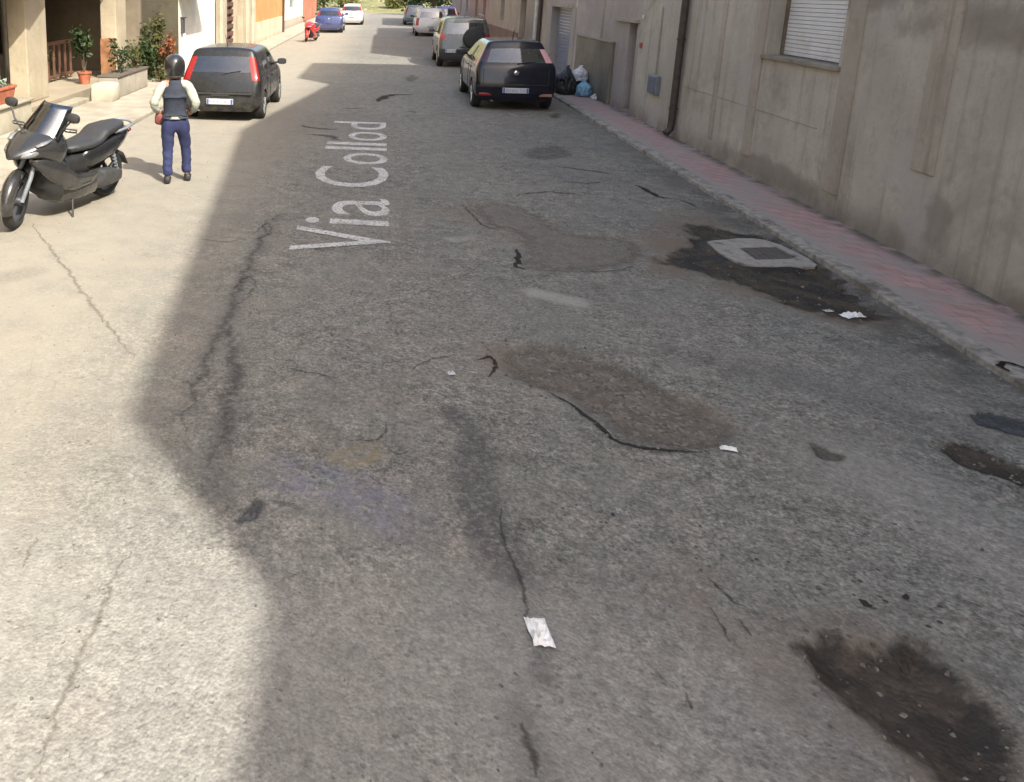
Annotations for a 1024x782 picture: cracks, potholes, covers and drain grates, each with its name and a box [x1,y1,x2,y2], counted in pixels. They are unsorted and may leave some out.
crack [635,185,695,206]
pothole [799,630,1013,782]
pothole [942,443,1024,488]
manhole cover [707,238,817,269]
pothole [970,412,1024,437]
crack [709,579,752,636]
crack [376,94,413,112]
pothole [812,445,845,461]
crack [521,723,538,775]
crack [500,509,526,617]
crack [477,355,498,377]
